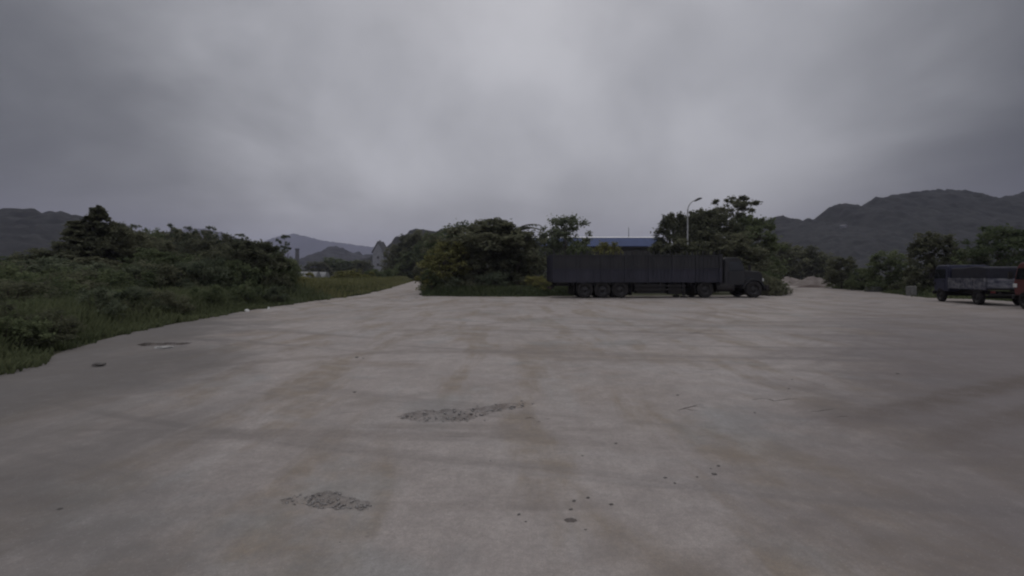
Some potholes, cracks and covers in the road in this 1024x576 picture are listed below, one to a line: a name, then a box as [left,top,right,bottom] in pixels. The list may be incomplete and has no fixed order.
pothole [398,400,535,423]
pothole [280,490,372,511]
